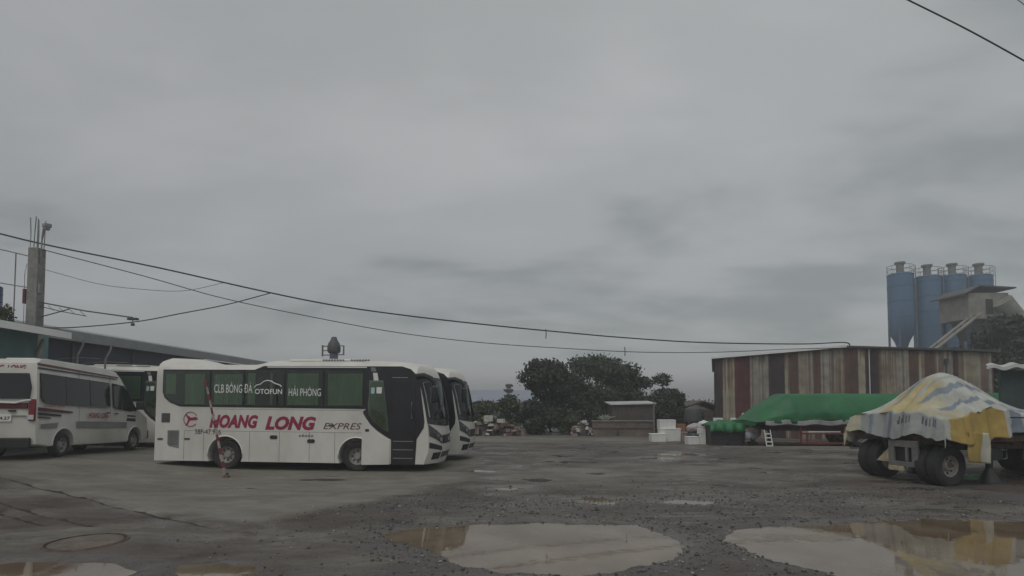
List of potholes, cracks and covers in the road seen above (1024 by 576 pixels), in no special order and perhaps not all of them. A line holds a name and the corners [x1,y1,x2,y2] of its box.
manhole cover [39,533,130,552]
